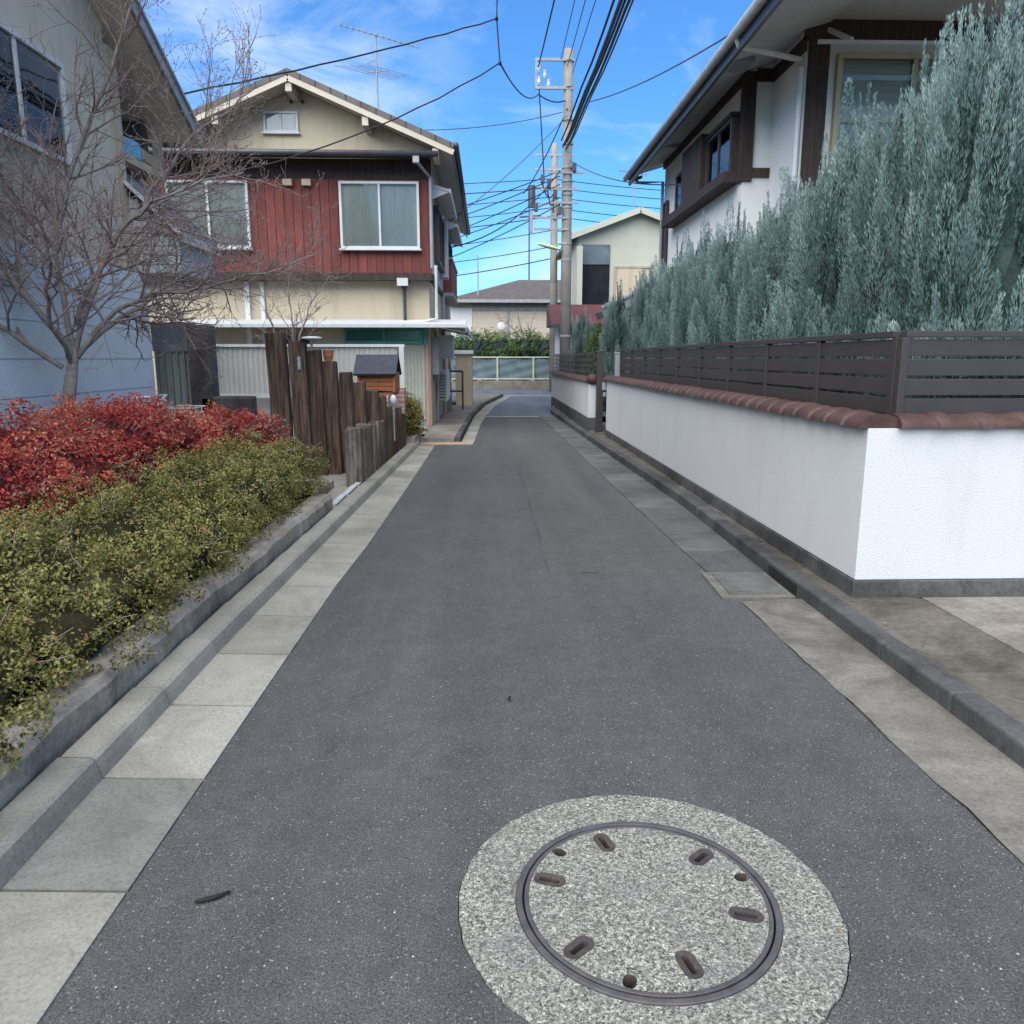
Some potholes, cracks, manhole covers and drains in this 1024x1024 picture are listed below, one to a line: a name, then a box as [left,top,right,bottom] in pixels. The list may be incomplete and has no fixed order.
manhole cover [459,795,850,1024]
